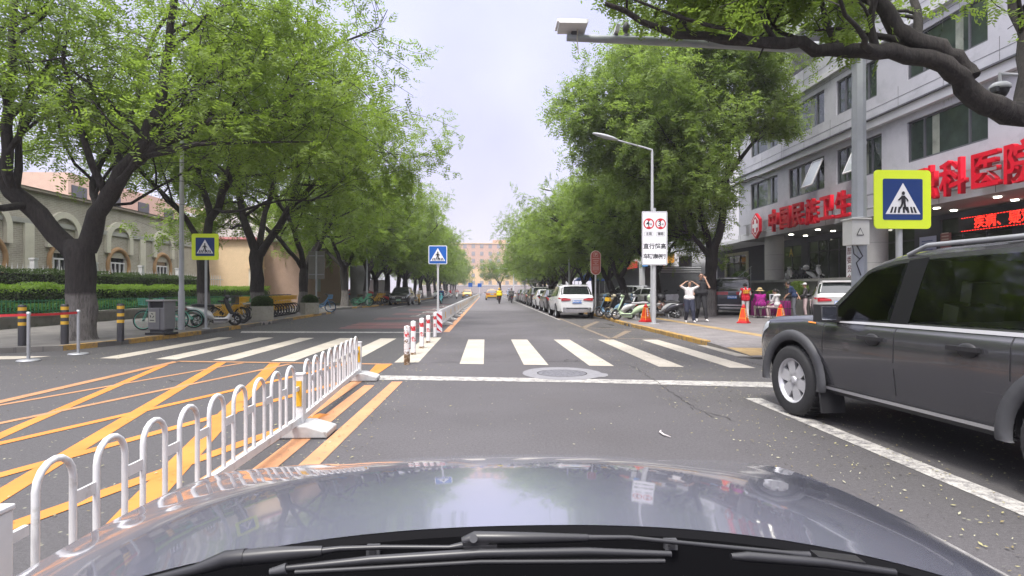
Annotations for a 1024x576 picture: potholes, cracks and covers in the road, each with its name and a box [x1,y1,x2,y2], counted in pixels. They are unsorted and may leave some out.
manhole cover [523,367,608,380]
